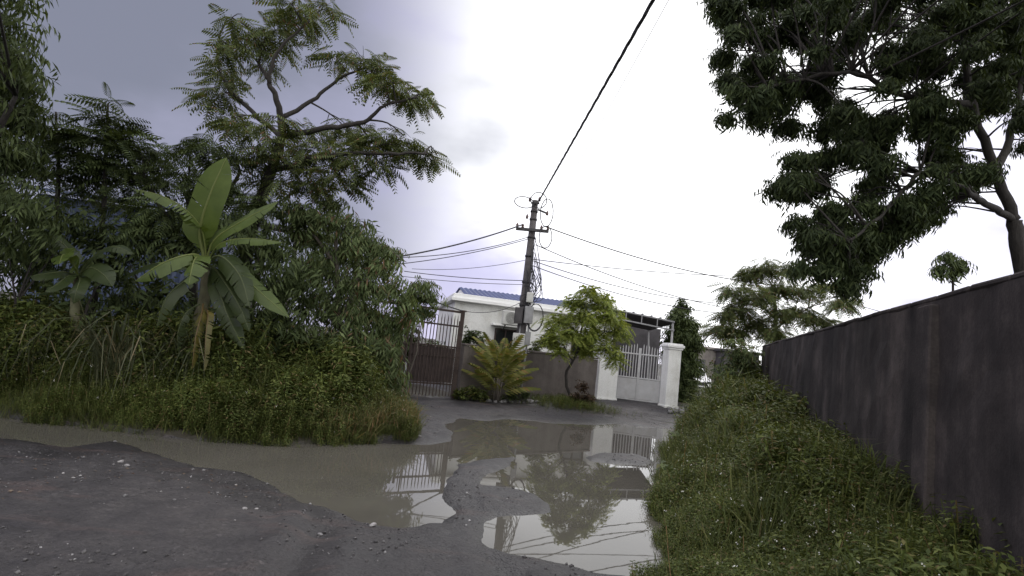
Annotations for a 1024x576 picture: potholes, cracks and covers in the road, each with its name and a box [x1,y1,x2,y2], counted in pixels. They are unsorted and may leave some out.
pothole [467,482,659,576]
pothole [477,459,558,497]
